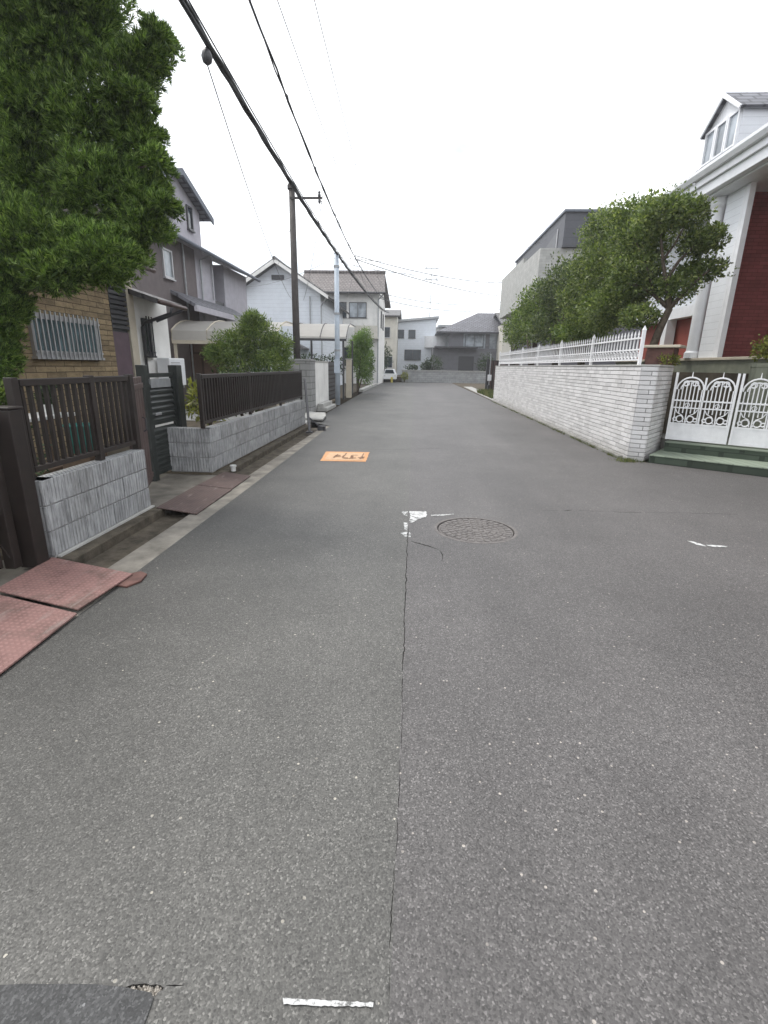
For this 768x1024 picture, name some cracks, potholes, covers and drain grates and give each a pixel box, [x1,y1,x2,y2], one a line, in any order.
manhole cover [434,517,518,544]
pothole [126,983,164,996]
crack [388,537,443,1020]
